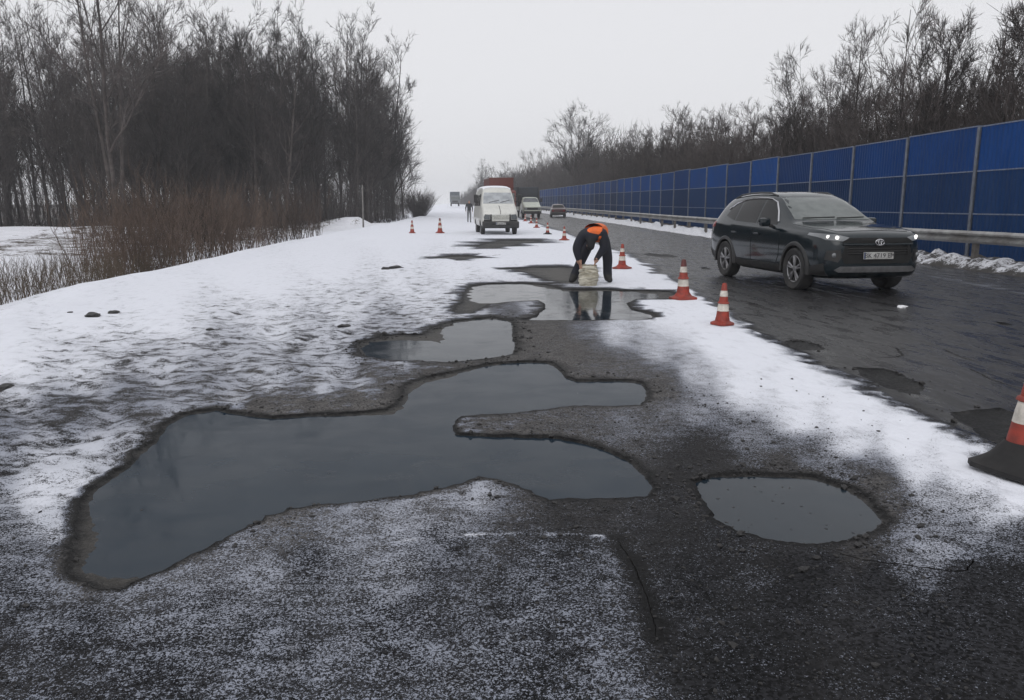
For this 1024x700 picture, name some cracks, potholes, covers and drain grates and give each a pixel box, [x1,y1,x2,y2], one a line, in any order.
crack [831,549,975,572]
pothole [477,240,536,248]
pothole [455,283,676,320]
pothole [66,360,657,589]
crack [619,542,657,637]
pothole [691,471,891,544]
pothole [357,316,518,362]
